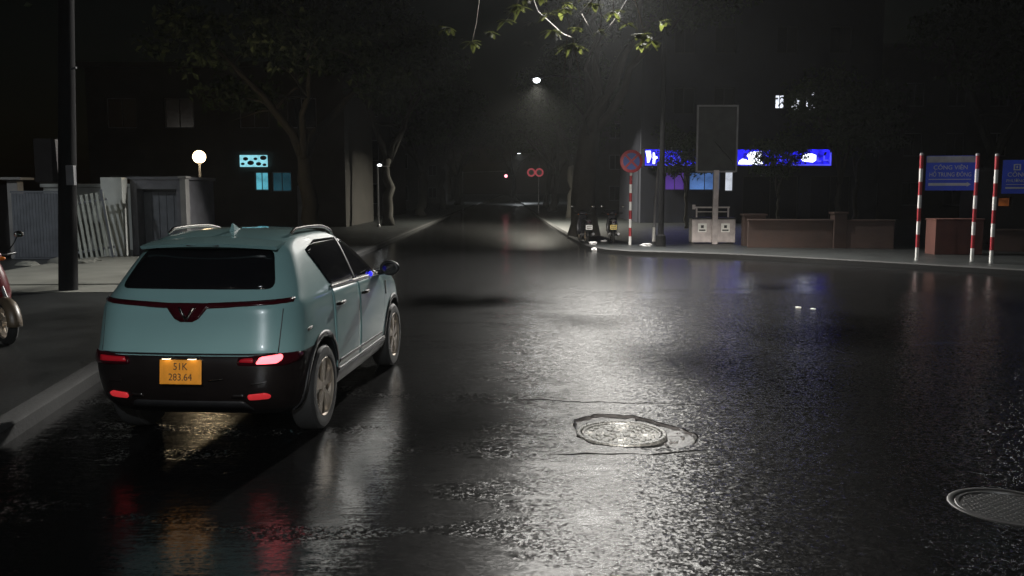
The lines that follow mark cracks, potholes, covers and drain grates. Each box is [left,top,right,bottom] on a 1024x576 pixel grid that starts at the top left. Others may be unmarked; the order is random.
manhole cover [947,488,1024,527]
manhole cover [576,420,667,448]
